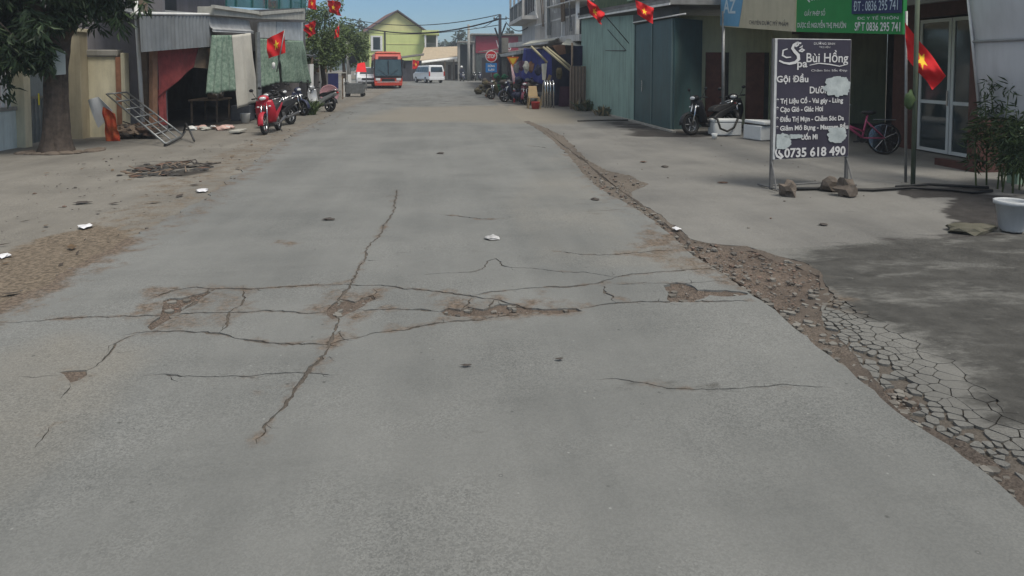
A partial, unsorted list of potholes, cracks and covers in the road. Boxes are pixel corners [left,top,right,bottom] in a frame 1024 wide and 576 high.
pothole [62,372,87,383]
pothole [665,284,747,302]
pothole [699,250,820,312]
pothole [442,305,579,317]
crack [824,297,1024,475]
pothole [327,298,374,319]
pothole [148,293,209,330]
crack [107,191,728,443]
